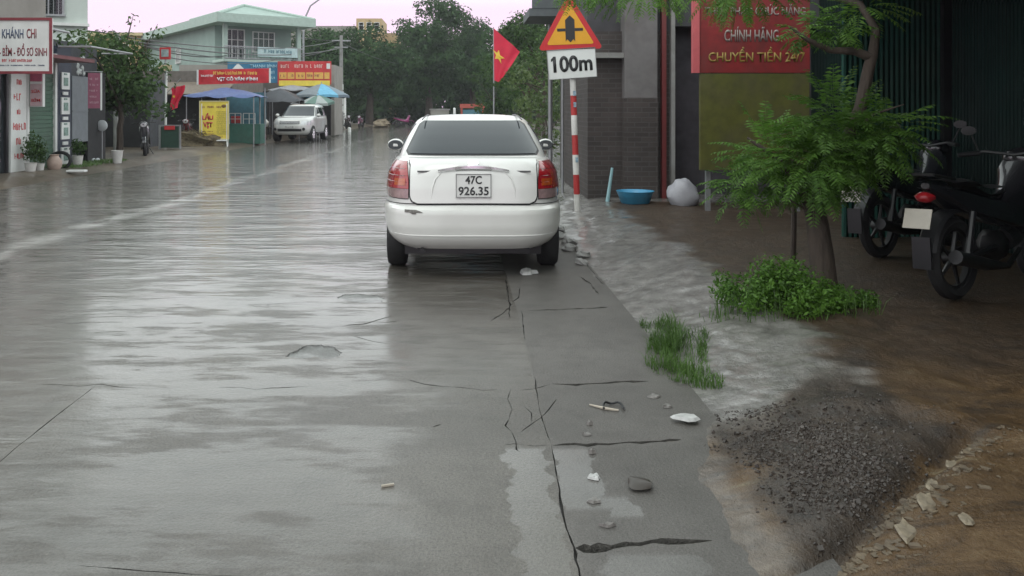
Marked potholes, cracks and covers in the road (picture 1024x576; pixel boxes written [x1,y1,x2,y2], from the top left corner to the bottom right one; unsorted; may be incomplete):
crack [0,379,479,462]
pothole [286,345,342,360]
crack [79,565,227,576]
crack [491,279,525,339]
crack [505,376,556,451]
pothole [337,294,384,303]
